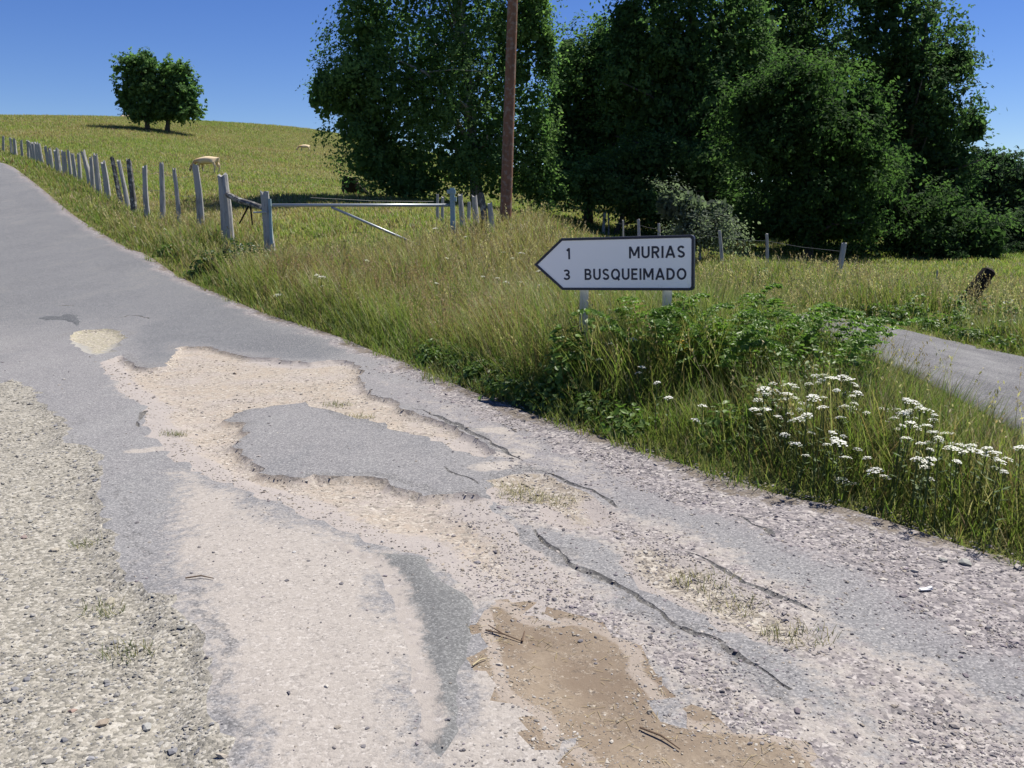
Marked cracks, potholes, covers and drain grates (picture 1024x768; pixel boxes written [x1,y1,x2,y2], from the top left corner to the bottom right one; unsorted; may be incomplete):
pothole [70,329,129,355]
crack [417,409,619,508]
crack [533,529,824,690]
pothole [99,346,577,618]
pothole [467,599,826,768]
